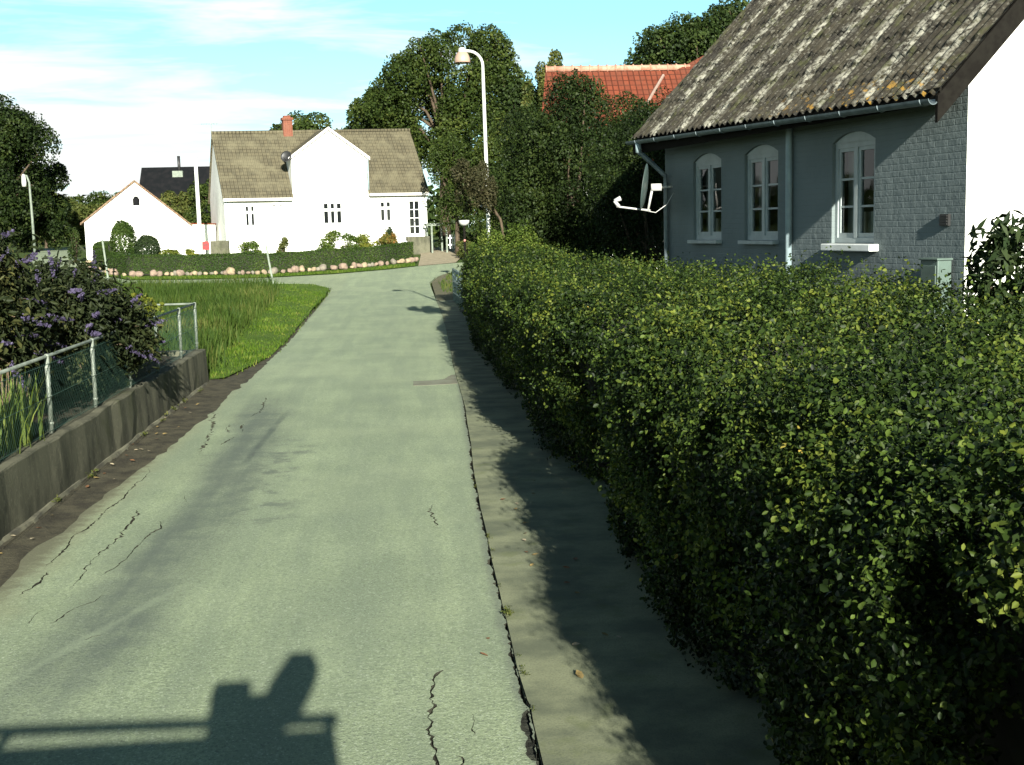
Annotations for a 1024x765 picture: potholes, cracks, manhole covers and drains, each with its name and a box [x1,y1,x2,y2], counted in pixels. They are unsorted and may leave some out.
crack [462,397,543,765]
crack [426,669,465,765]
crack [20,470,162,623]
crack [198,397,267,453]
